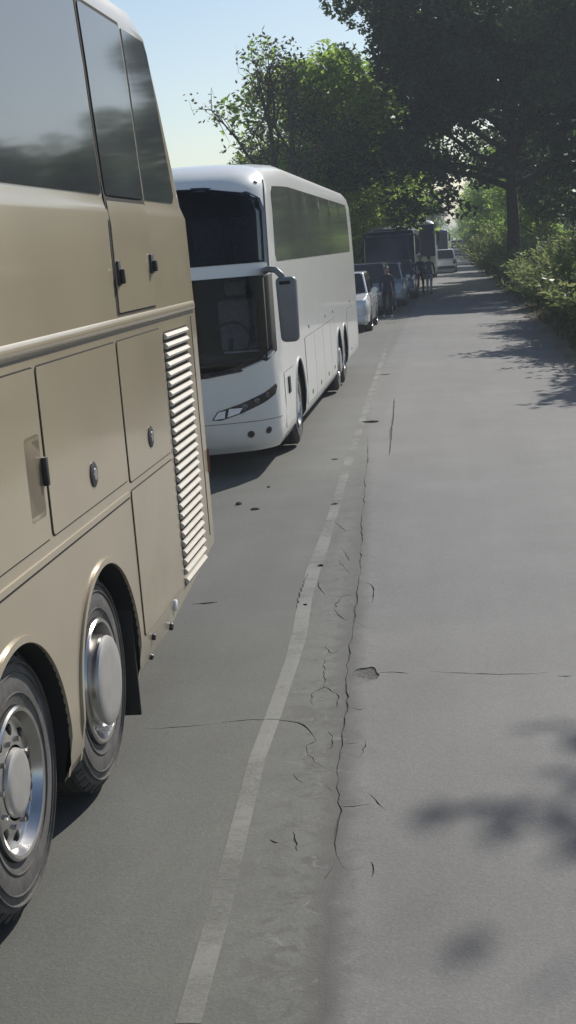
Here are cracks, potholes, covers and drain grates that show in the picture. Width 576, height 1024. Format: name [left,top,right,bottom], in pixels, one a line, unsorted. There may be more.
pothole [353,667,379,681]
crack [160,438,383,878]
